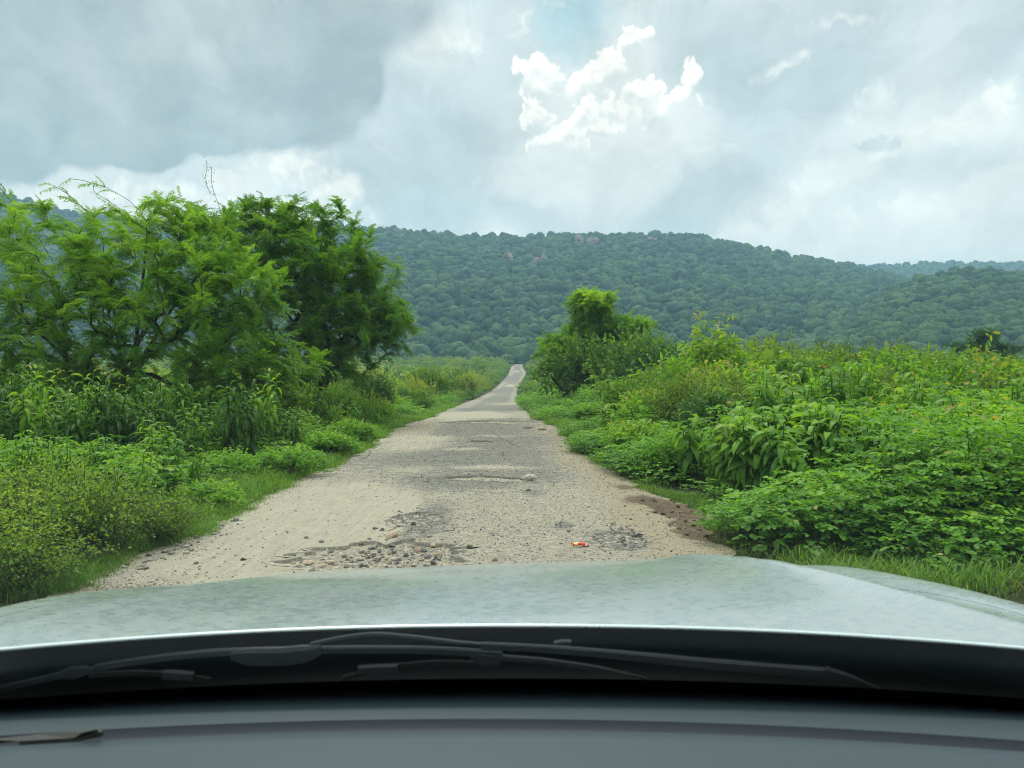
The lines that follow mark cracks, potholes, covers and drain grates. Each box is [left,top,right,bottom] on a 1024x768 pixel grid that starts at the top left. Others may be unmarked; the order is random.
pothole [377,510,452,528]
pothole [437,474,544,483]
pothole [260,537,480,573]
pothole [584,529,654,549]
